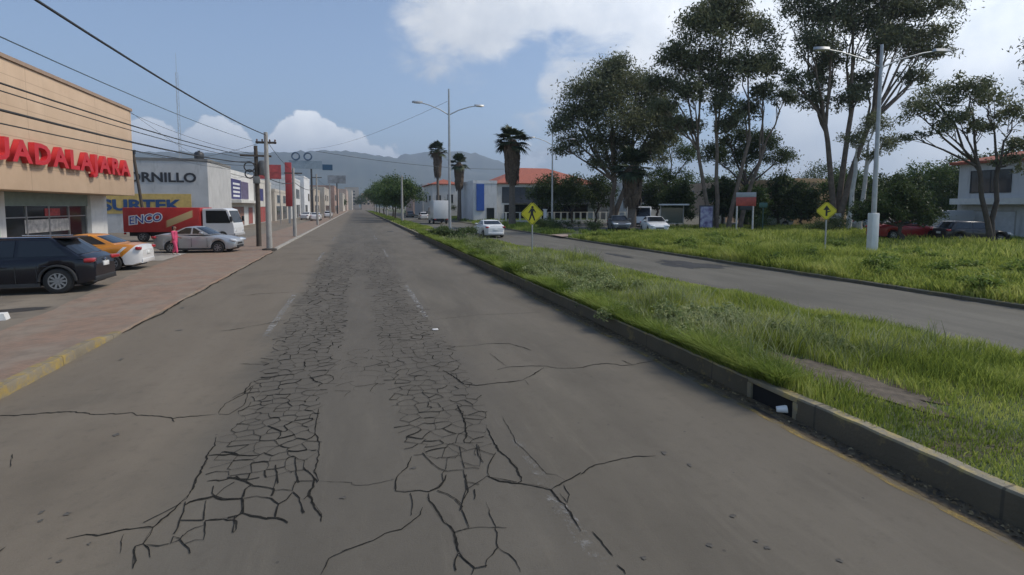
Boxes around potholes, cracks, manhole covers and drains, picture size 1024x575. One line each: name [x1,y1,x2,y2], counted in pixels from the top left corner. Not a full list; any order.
crack [0,248,657,574]
drain grate [747,377,805,420]
